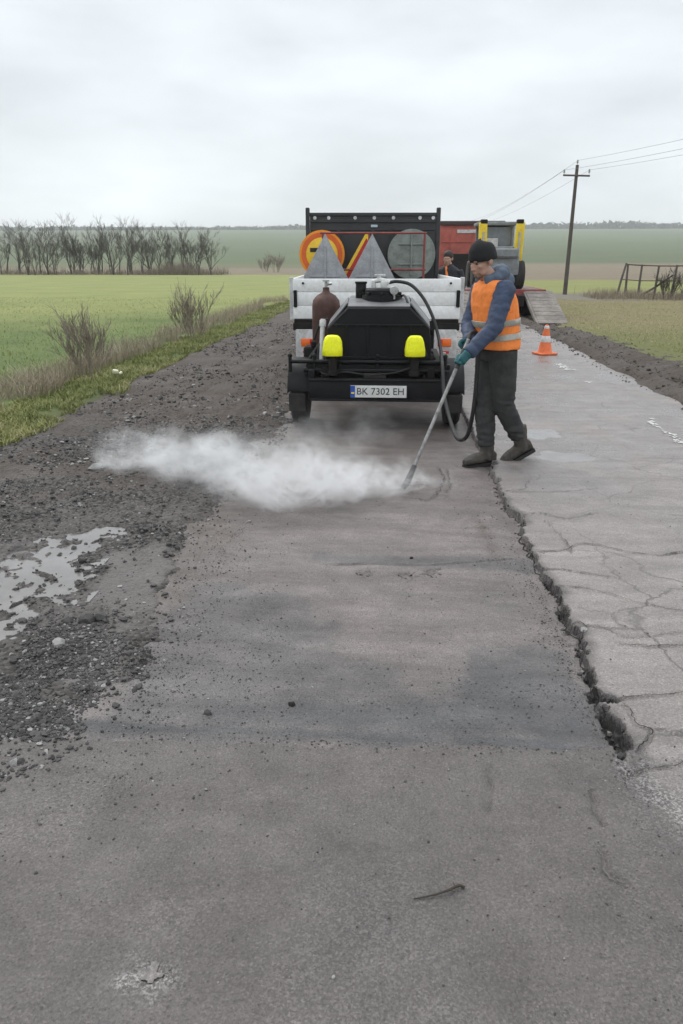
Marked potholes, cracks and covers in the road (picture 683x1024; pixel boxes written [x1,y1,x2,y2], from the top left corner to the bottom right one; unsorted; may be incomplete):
pothole [136,961,172,985]
crack [598,848,620,885]
crack [338,444,680,725]
